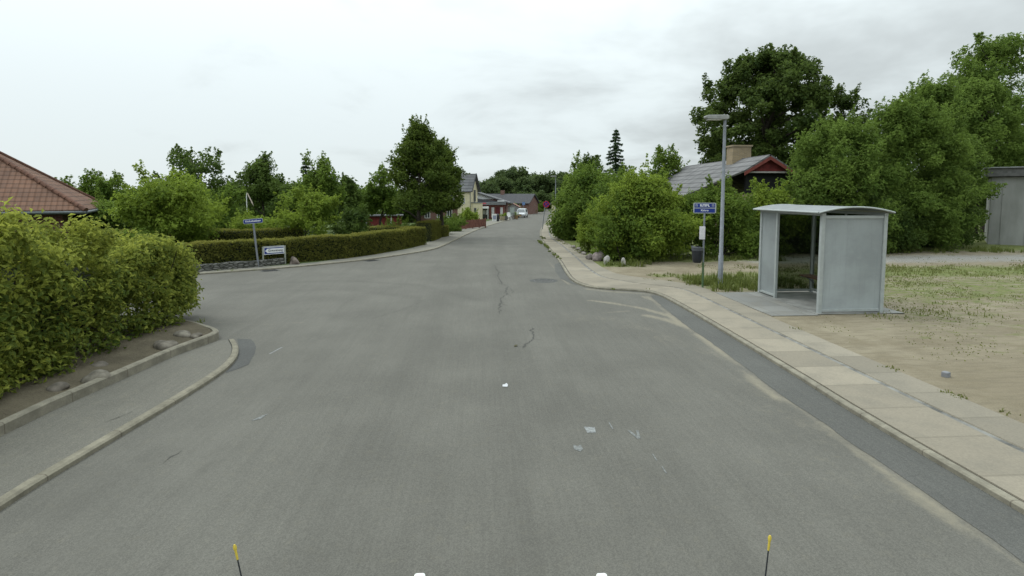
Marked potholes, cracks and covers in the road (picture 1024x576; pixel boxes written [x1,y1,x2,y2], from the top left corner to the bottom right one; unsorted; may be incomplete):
crack [494,265,514,314]
